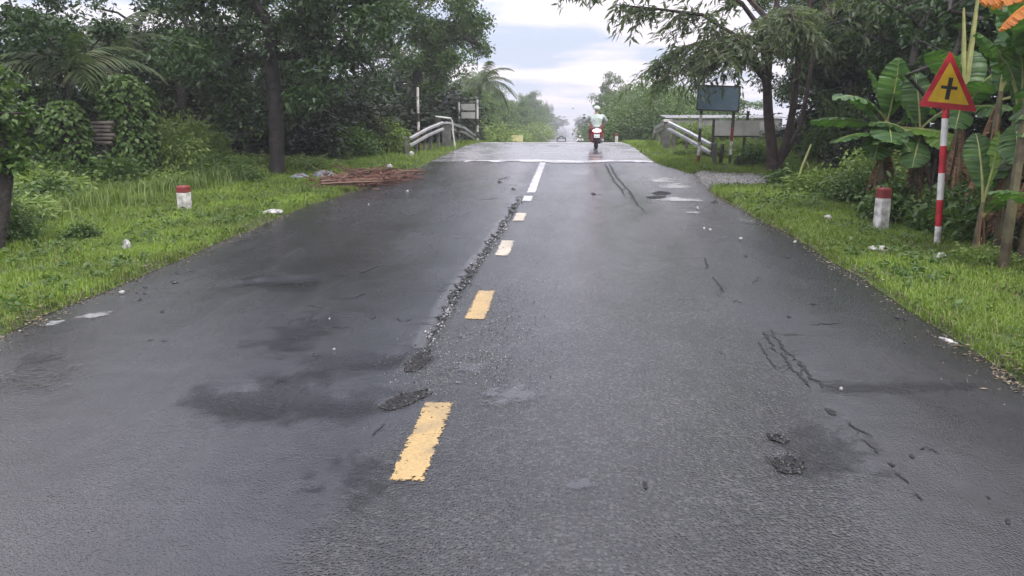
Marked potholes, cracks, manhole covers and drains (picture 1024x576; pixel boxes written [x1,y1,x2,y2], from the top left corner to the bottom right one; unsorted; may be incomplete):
crack [752,322,846,393]
pothole [378,388,433,410]
crack [689,257,742,303]
crack [396,163,527,349]
pothole [767,432,790,444]
pothole [769,451,806,474]
pothole [404,349,431,372]
